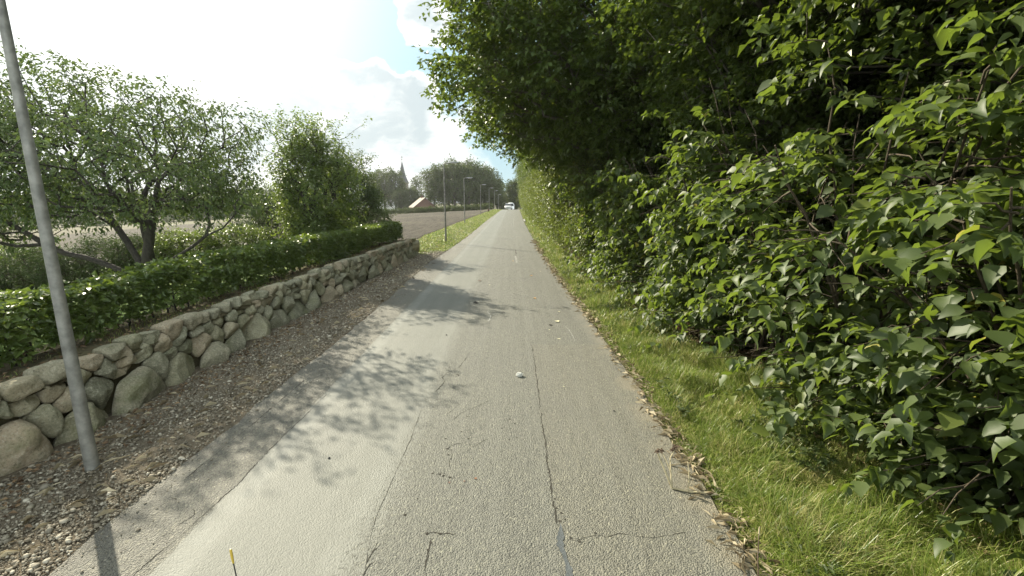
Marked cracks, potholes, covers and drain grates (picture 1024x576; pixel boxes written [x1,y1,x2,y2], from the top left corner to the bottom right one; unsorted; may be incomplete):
crack [569,532,683,542]
crack [424,532,453,570]
crack [403,355,518,516]
